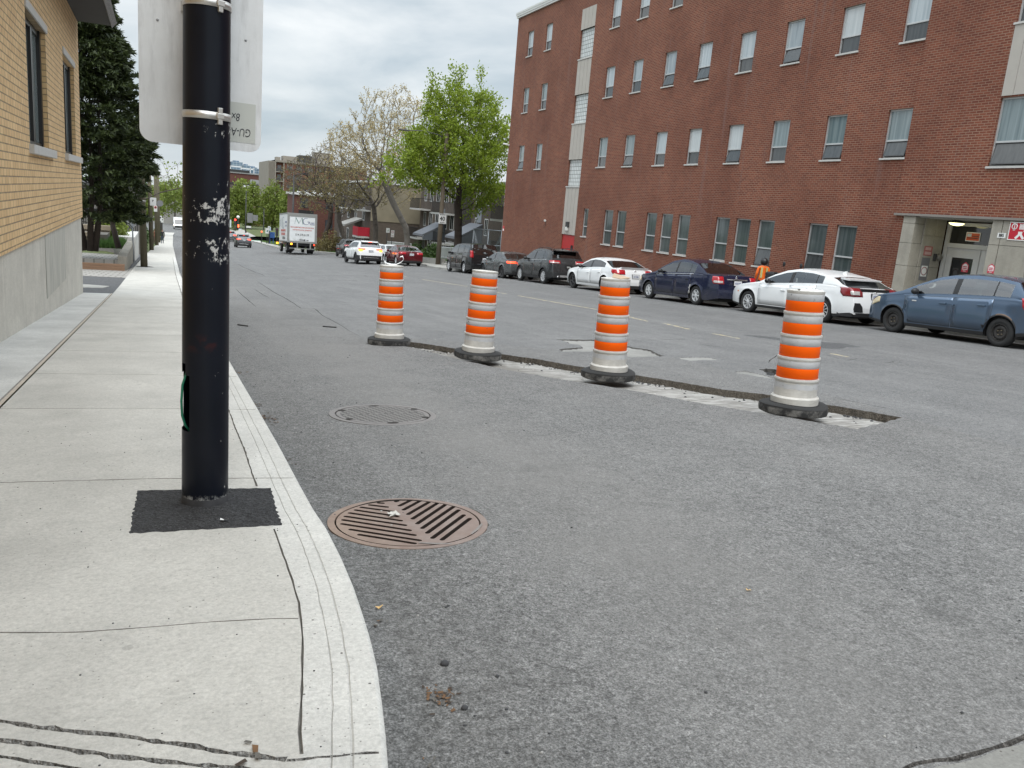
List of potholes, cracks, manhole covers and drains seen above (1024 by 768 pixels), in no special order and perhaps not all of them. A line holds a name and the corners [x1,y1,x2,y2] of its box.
manhole cover [329,404,436,425]
drain grate [327,498,488,550]
crack [902,734,1024,768]
